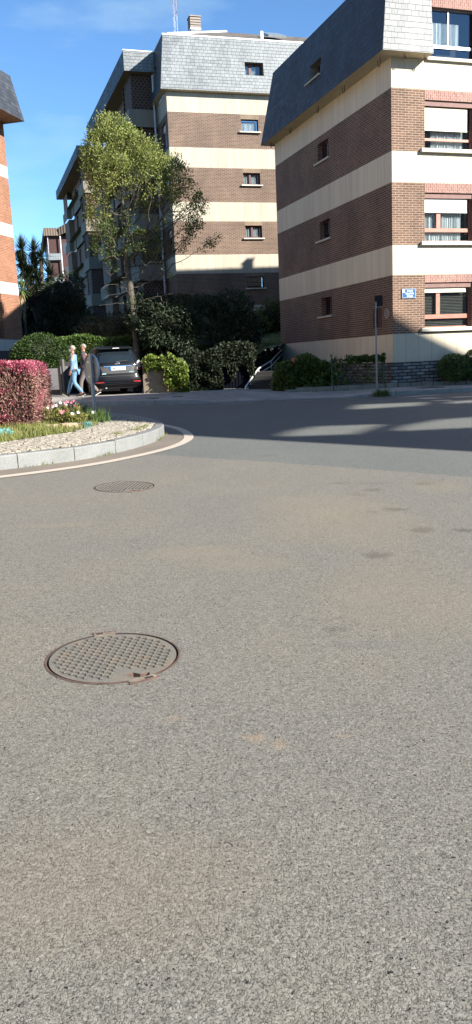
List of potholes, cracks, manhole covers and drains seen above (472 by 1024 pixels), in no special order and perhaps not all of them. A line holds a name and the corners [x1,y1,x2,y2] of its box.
manhole cover [45,631,180,685]
manhole cover [94,481,155,492]
